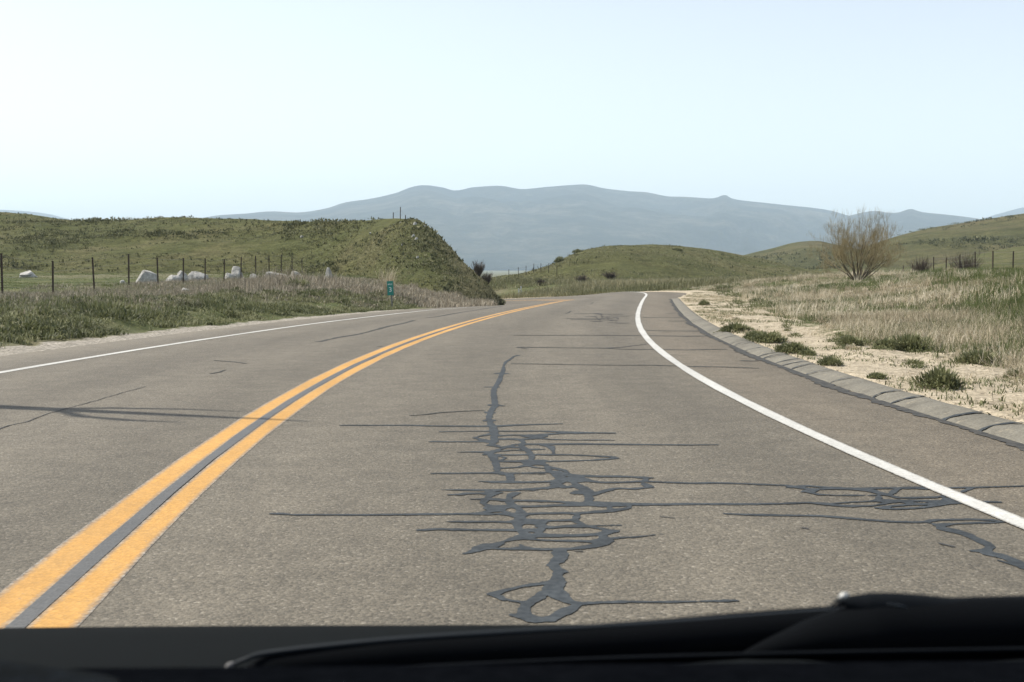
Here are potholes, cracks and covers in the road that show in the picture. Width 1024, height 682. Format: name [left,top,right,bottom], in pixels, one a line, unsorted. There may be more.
crack [0,386,146,429]
crack [269,302,808,623]
